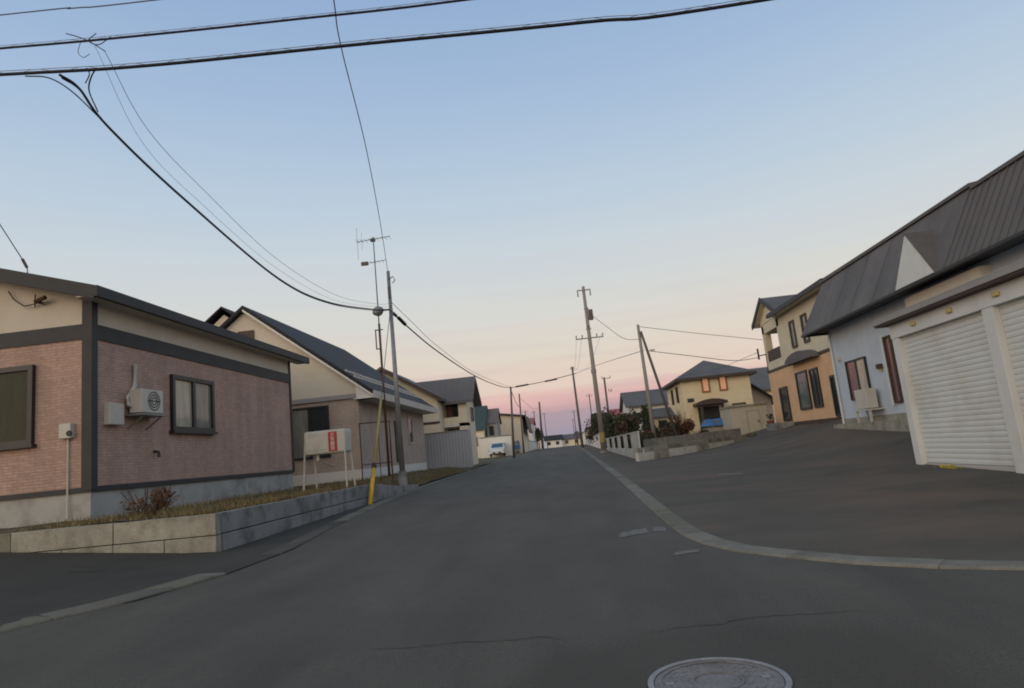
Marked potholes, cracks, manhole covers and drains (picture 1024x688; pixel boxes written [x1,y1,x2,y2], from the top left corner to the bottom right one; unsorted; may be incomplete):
crack [382,636,557,649]
crack [645,609,884,634]
manhole cover [648,657,793,688]
